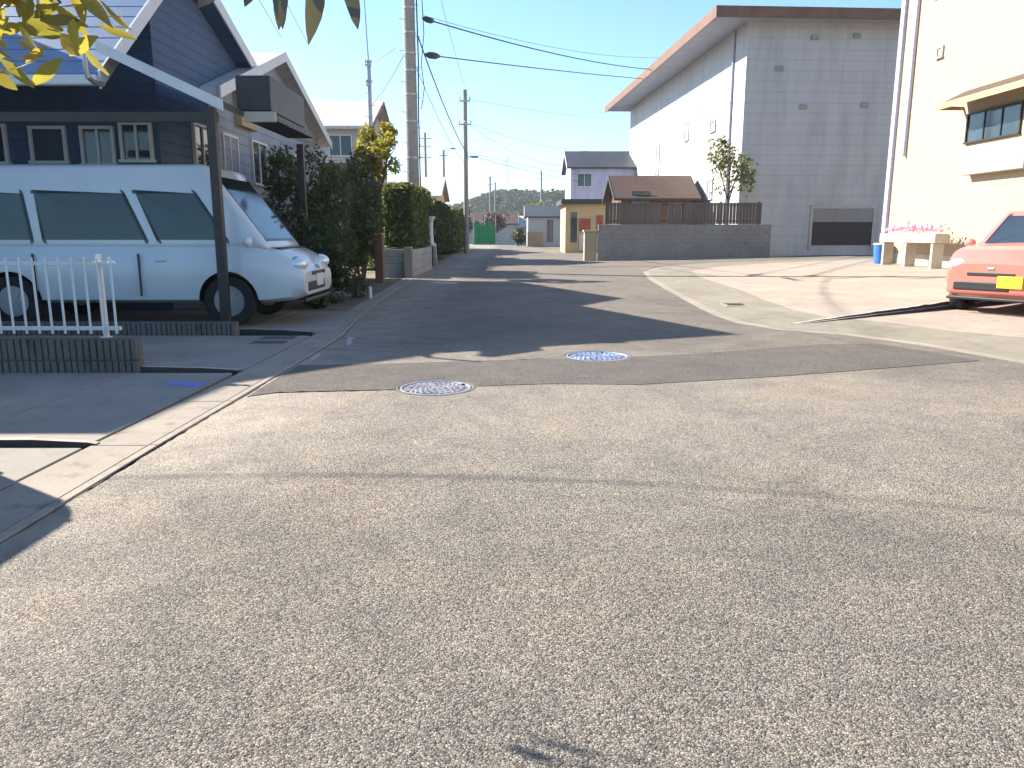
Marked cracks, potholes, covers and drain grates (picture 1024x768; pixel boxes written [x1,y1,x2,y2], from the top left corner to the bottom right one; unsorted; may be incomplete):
manhole cover [563,351,632,361]
manhole cover [395,380,475,396]
